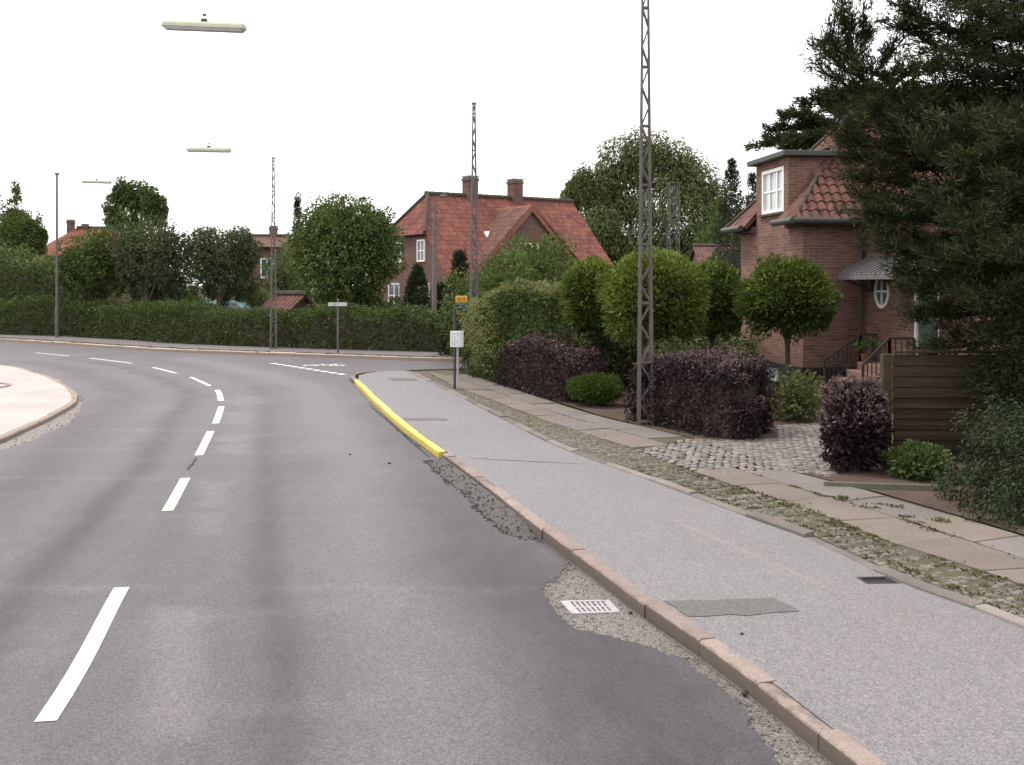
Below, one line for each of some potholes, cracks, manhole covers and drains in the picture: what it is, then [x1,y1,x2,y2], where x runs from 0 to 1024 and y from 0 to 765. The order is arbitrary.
pothole [423,457,545,544]
drain grate [856,576,902,584]
drain grate [560,600,620,616]
pothole [542,550,832,765]
